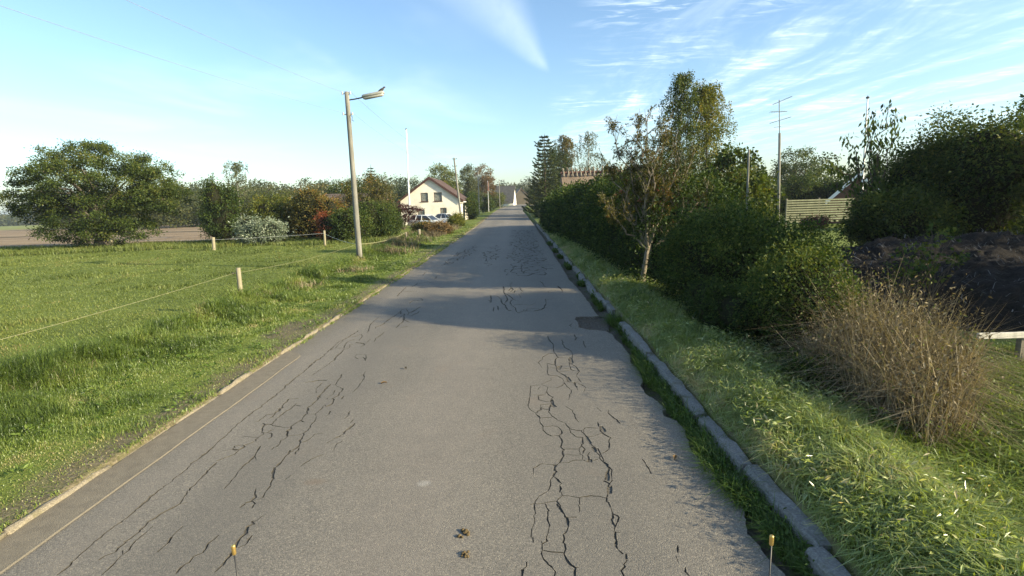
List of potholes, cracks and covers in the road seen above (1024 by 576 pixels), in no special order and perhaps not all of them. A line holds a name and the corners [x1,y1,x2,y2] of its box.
crack [57,230,563,575]
crack [521,325,628,576]
